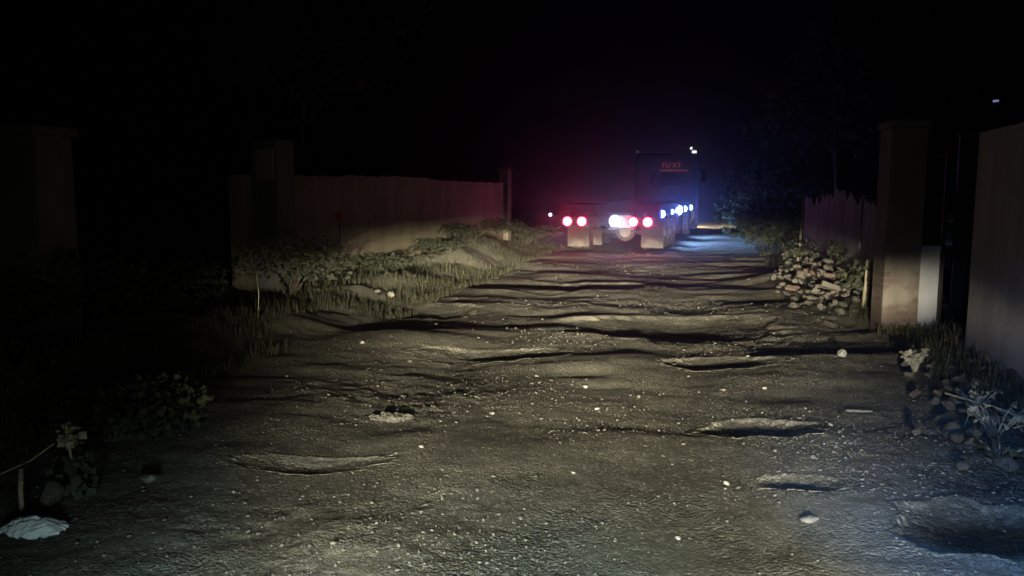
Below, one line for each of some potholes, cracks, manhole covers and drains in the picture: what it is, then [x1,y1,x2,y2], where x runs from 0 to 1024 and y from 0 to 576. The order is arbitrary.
pothole [882,494,1024,564]
pothole [751,472,855,493]
pothole [215,453,403,476]
pothole [685,417,833,439]
pothole [654,355,791,372]
